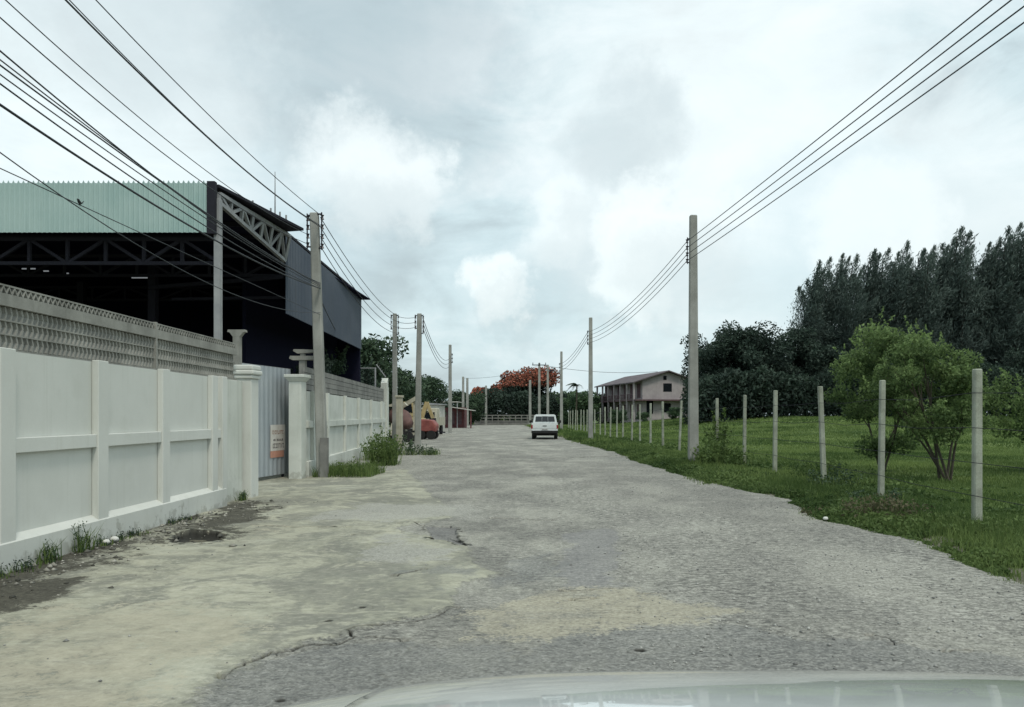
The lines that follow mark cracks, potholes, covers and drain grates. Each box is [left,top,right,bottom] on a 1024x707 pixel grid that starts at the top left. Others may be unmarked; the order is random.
crack [393,568,426,577]
pothole [162,528,235,544]
pothole [421,525,473,546]
crack [217,606,458,679]
